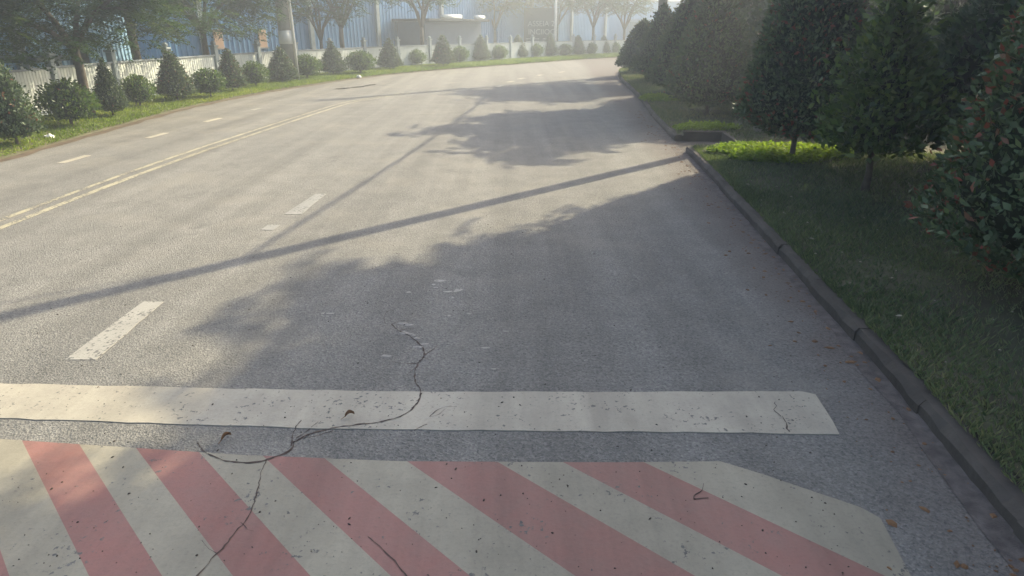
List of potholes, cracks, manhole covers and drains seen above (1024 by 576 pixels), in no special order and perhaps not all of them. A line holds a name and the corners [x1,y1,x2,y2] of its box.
crack [196,310,456,576]
